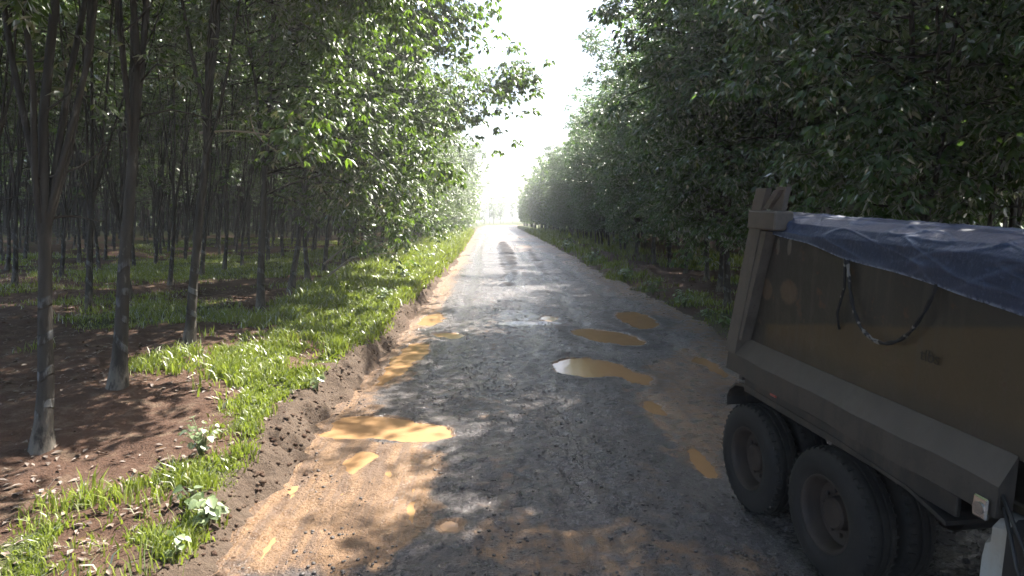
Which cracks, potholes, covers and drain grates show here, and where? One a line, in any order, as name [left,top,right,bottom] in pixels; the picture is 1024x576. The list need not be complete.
pothole [329,445,394,485]
pothole [412,312,450,327]
pothole [314,413,464,444]
pothole [567,327,653,347]
pothole [367,340,436,387]
pothole [629,398,681,420]
pothole [426,330,467,340]
pothole [610,311,663,330]
pothole [676,443,729,483]
pothole [546,355,665,387]
